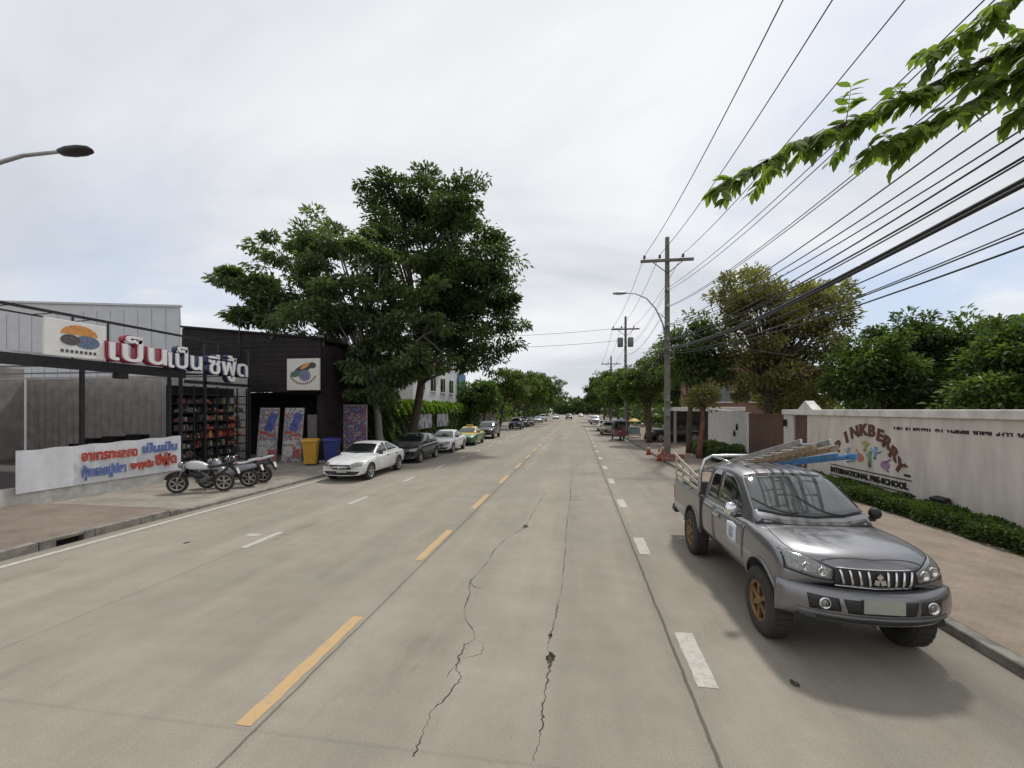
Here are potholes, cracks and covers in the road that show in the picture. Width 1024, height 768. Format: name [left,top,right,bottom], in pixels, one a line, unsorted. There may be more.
crack [533,472,573,760]
crack [412,494,545,757]
